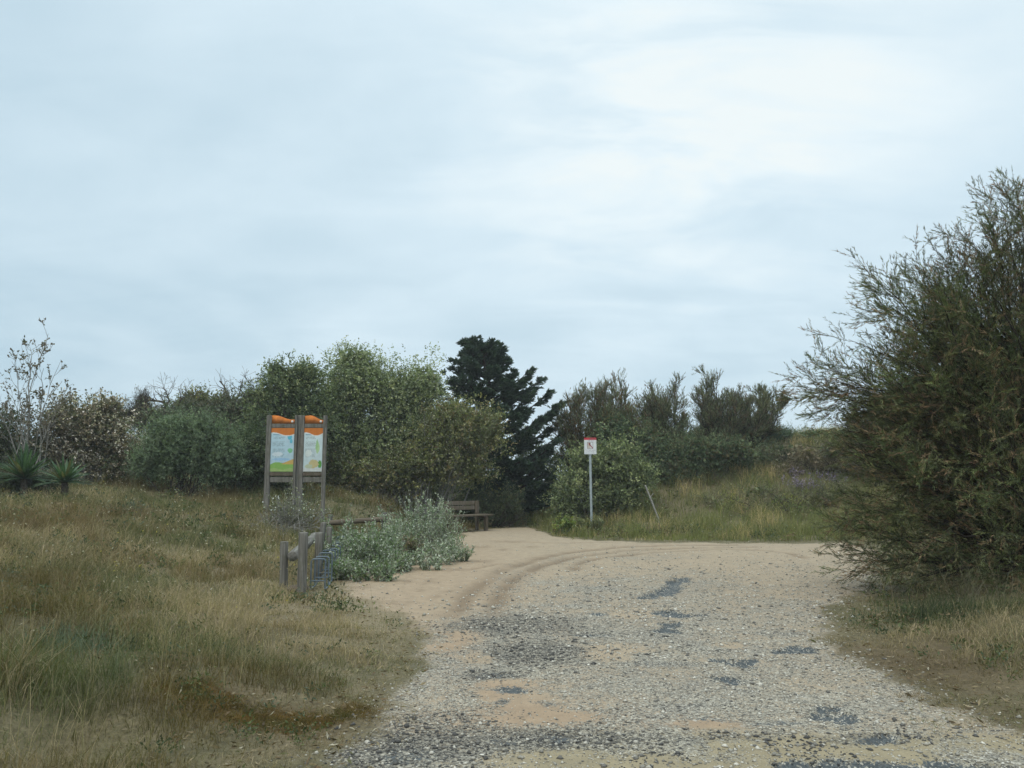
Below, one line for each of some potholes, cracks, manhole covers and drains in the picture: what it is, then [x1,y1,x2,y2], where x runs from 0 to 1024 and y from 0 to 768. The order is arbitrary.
pothole [701,673,756,688]
pothole [840,730,919,750]
pothole [753,644,827,656]
pothole [699,656,770,672]
pothole [642,620,691,636]
pothole [642,608,716,620]
pothole [633,576,698,600]
pothole [792,700,874,731]
pothole [480,684,537,697]
